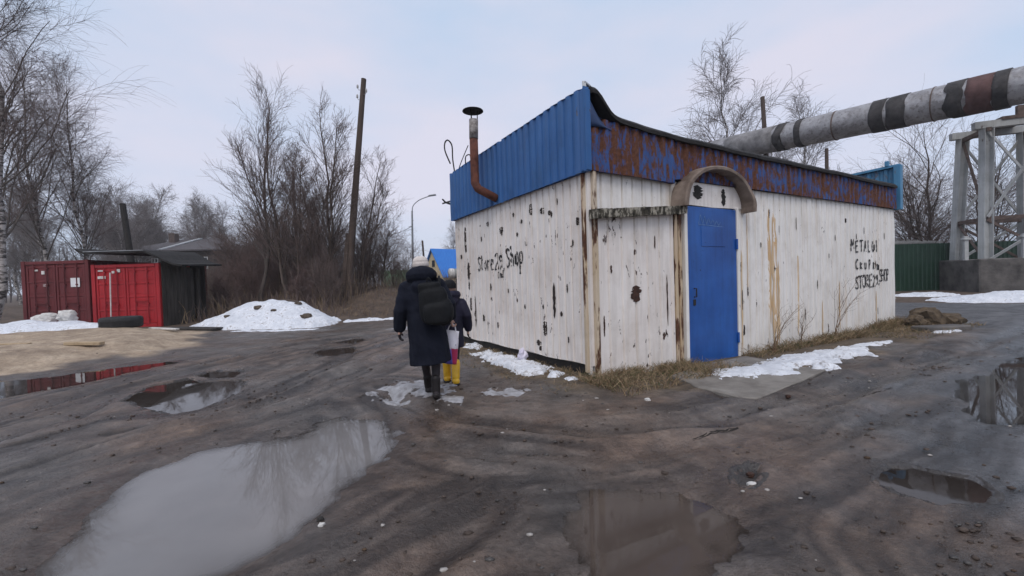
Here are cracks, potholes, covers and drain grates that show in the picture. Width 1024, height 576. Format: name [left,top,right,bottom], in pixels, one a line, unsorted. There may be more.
pothole [192,370,245,379]
pothole [122,378,249,414]
pothole [312,346,357,357]
pothole [870,462,1005,507]
pothole [727,460,769,489]
